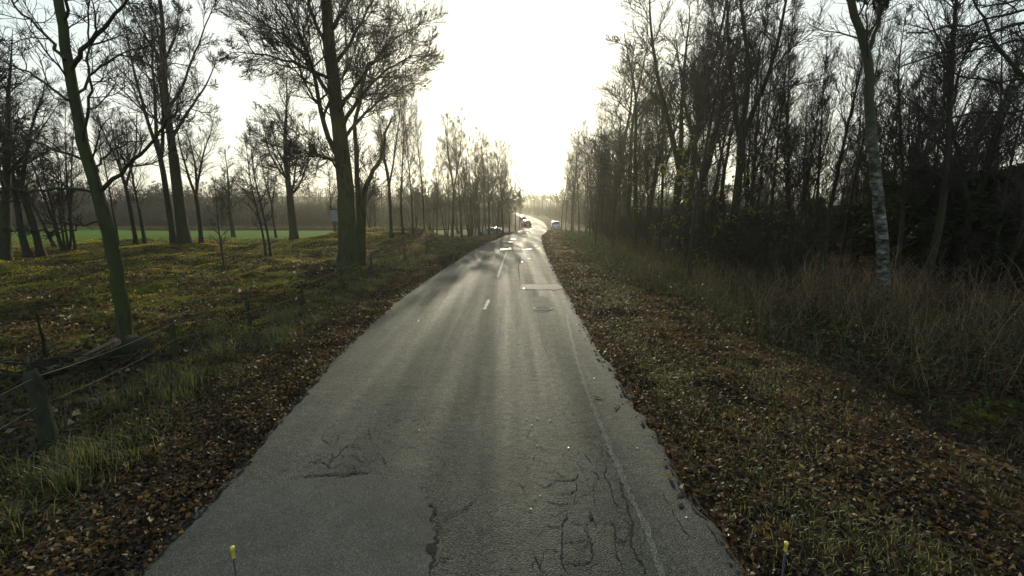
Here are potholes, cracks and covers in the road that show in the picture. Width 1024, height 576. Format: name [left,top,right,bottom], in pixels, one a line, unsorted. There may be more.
crack [282,416,467,488]
crack [510,413,646,576]
